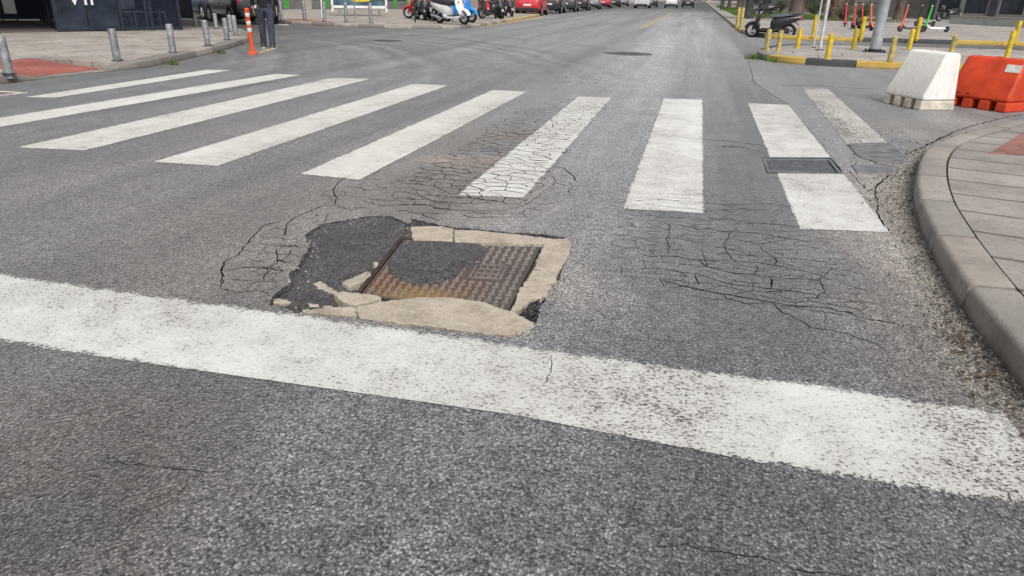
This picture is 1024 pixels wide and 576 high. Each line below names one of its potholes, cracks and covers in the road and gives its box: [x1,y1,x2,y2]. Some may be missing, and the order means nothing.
pothole [519,299,545,323]
crack [99,461,220,473]
crack [220,98,607,293]
crack [652,544,861,576]
crack [611,190,894,348]
